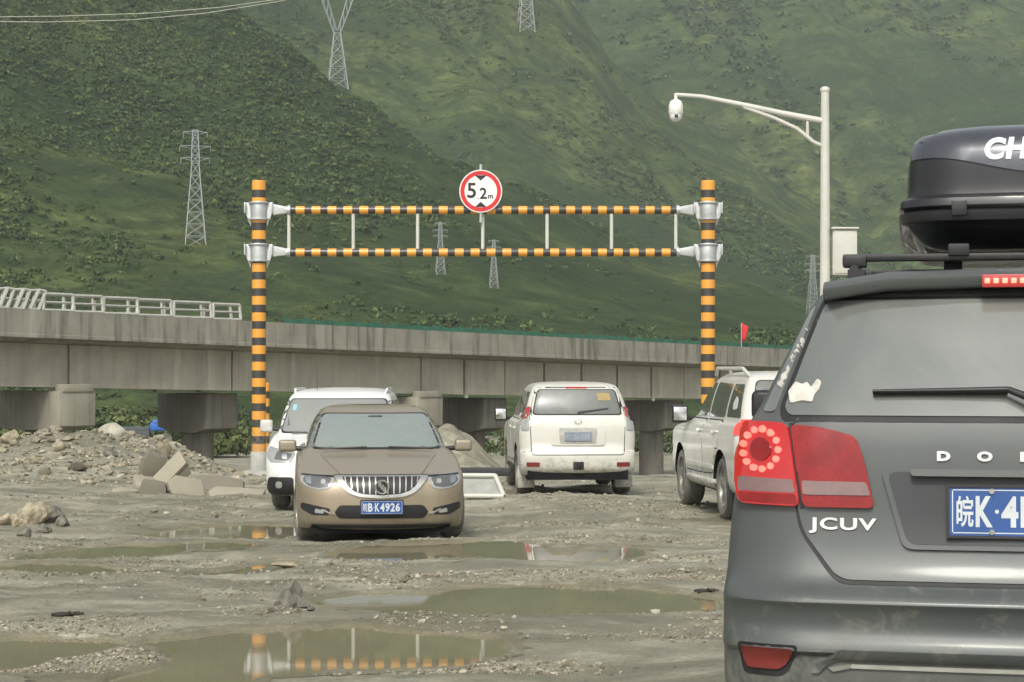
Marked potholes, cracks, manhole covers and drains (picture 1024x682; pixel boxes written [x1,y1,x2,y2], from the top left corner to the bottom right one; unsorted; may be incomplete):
pothole [24,619,534,682]
pothole [302,578,724,614]
pothole [3,540,268,560]
pothole [317,538,660,563]
